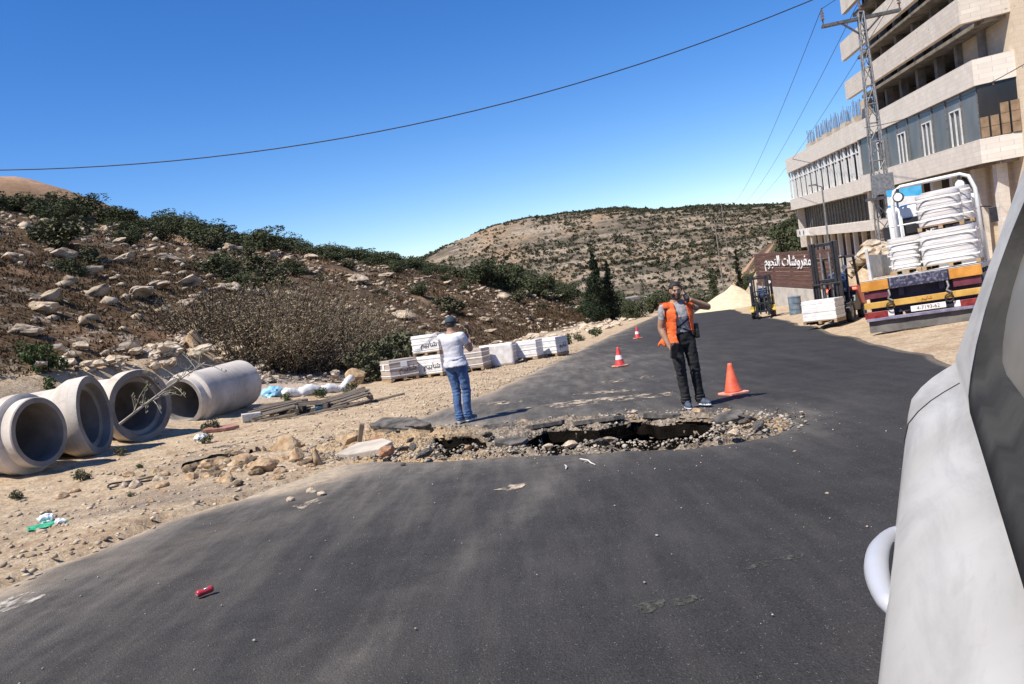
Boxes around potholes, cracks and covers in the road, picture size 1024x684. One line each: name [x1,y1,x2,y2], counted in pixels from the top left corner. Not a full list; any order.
pothole [435,436,487,458]
pothole [526,423,716,455]
